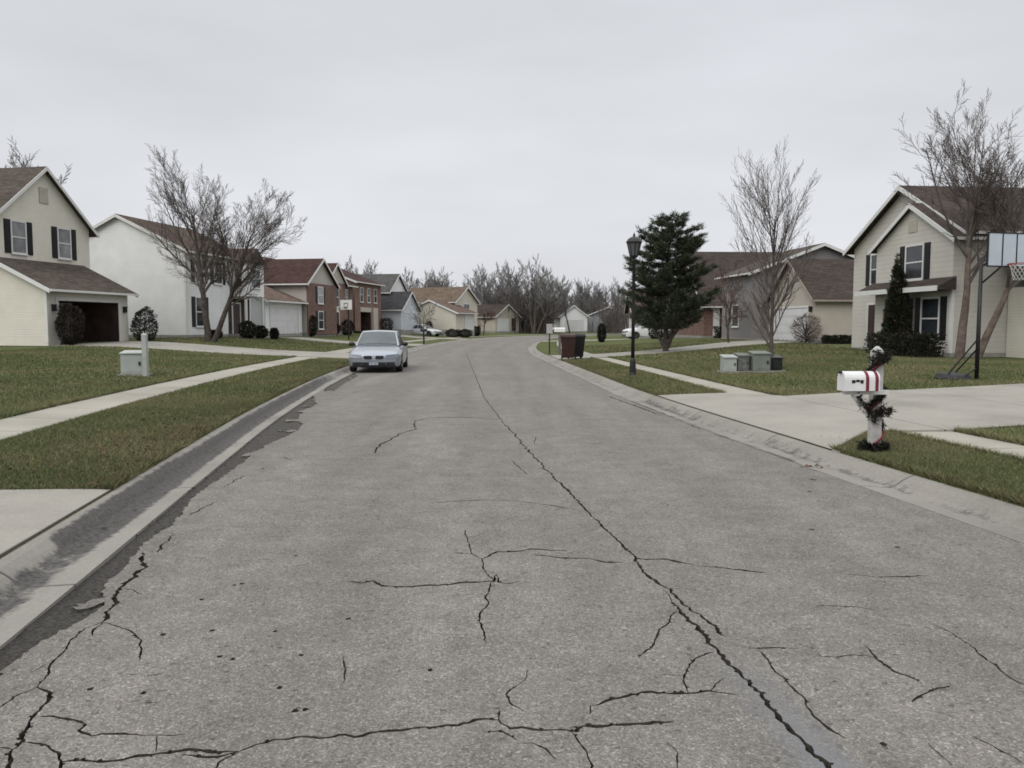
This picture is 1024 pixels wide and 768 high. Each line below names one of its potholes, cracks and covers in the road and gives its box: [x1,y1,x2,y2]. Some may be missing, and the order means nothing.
crack [755,646,951,738]
crack [932,624,1022,684]
crack [0,530,766,768]
crack [375,417,500,453]
crack [433,499,571,509]
